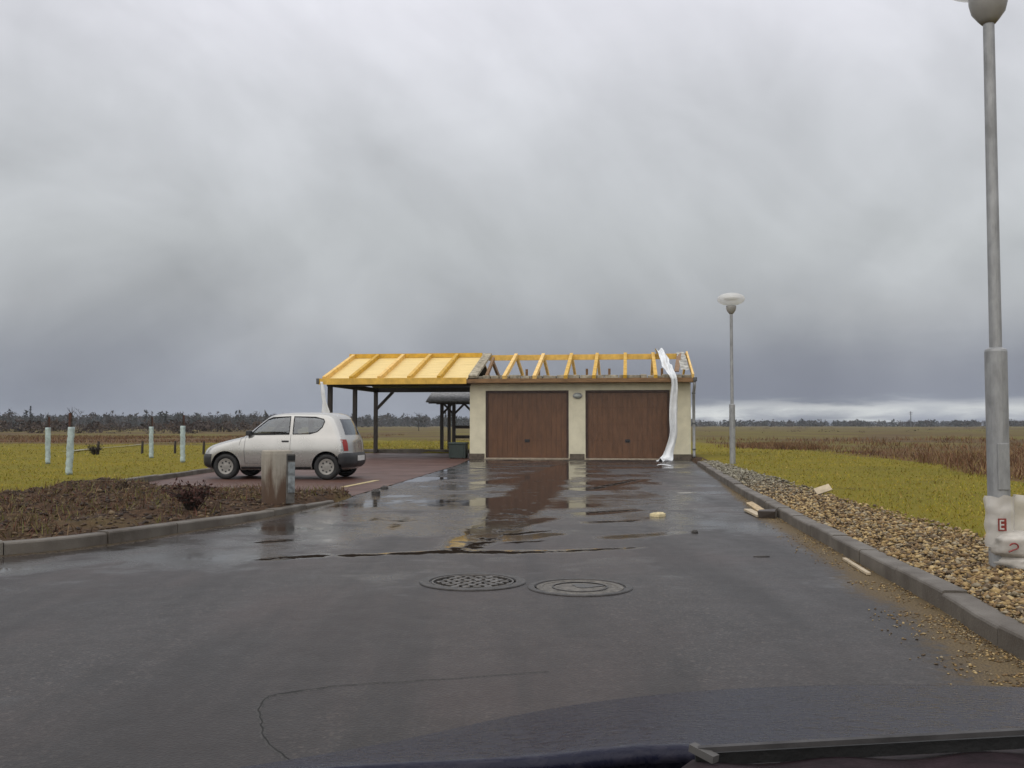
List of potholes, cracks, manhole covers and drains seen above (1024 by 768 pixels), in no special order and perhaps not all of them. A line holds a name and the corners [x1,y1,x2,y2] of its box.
crack [255,671,549,760]
manhole cover [527,578,633,597]
